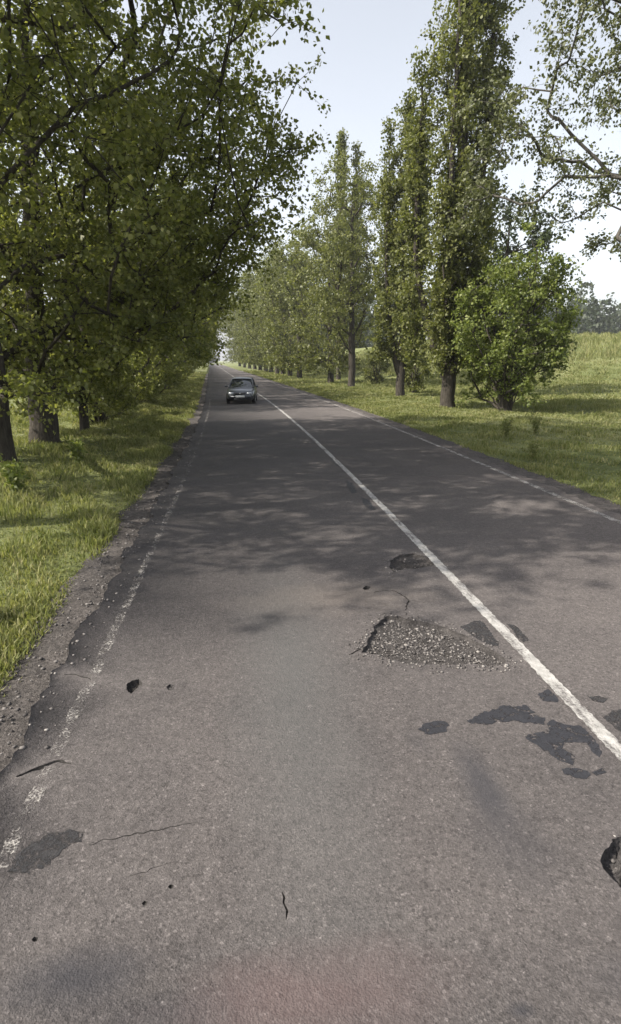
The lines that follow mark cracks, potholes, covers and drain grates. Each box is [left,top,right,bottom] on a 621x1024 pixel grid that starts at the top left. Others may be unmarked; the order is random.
pothole [347,608,522,675]
pothole [600,835,621,887]
pothole [126,679,142,693]
pothole [385,552,434,576]
crack [91,822,196,845]
crack [16,759,71,777]
